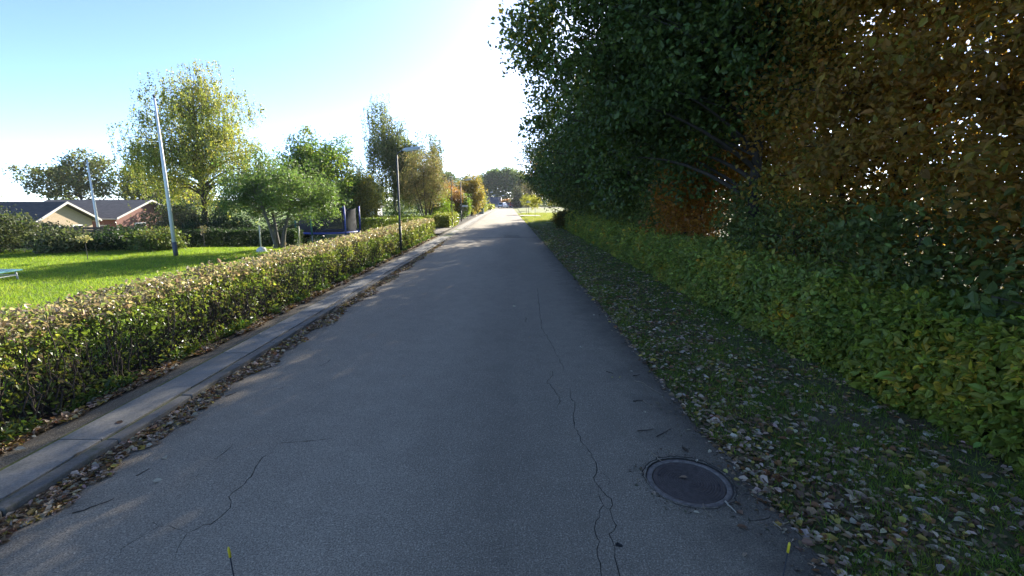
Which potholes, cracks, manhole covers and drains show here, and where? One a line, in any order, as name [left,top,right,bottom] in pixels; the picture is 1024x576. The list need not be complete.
manhole cover [642,456,738,509]
crack [117,443,274,559]
crack [537,290,620,576]
